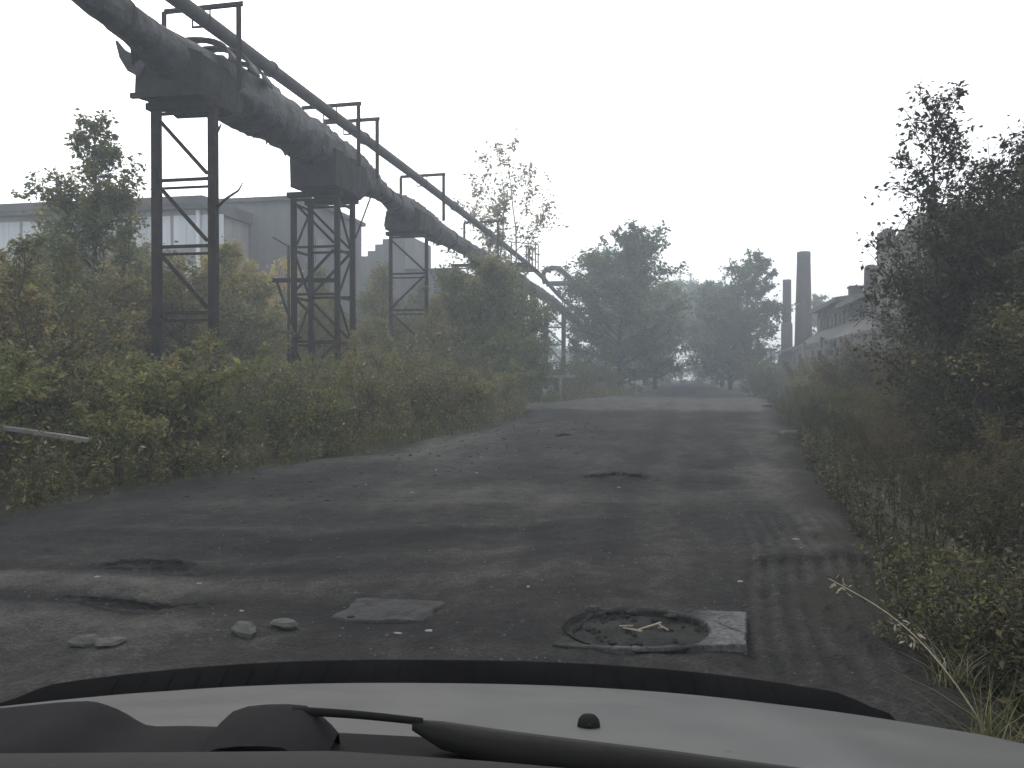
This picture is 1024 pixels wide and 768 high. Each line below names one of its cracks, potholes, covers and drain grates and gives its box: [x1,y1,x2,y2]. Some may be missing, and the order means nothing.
pothole [62,593,218,615]
pothole [89,557,202,577]
pothole [571,471,660,483]
manhole cover [552,604,748,655]
